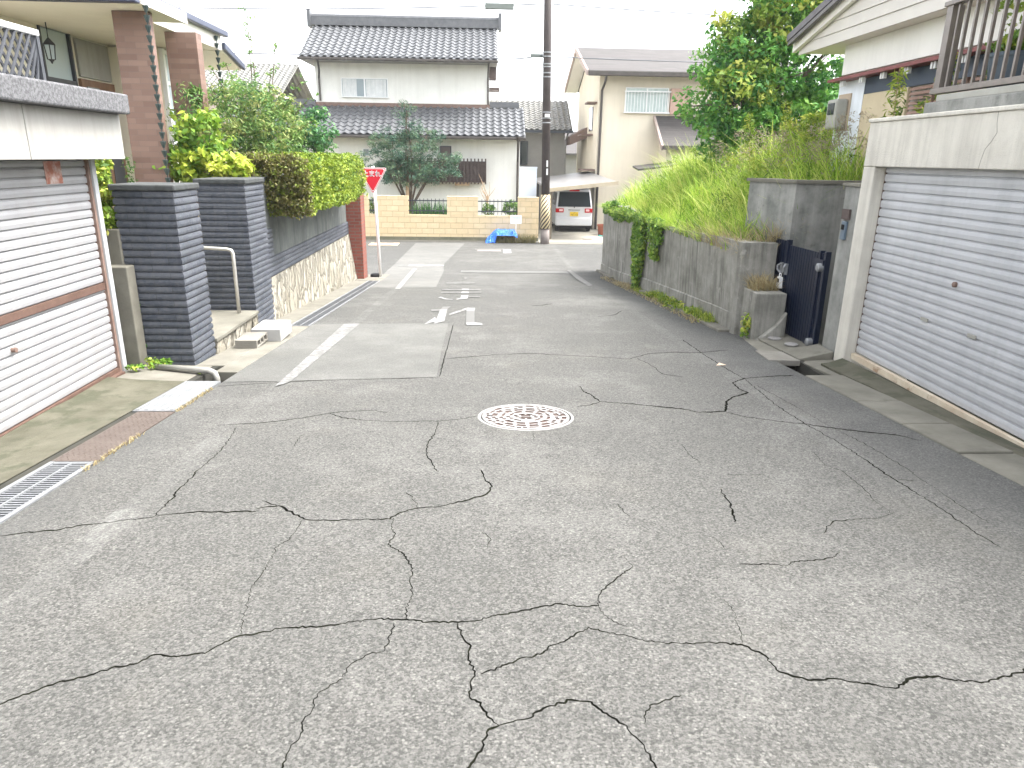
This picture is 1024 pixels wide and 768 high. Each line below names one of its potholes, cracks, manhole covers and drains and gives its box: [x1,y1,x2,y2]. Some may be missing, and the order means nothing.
crack [578,340,1000,547]
crack [0,410,1024,768]
drain grate [0,461,94,524]
crack [449,350,723,377]
manhole cover [478,404,574,431]
